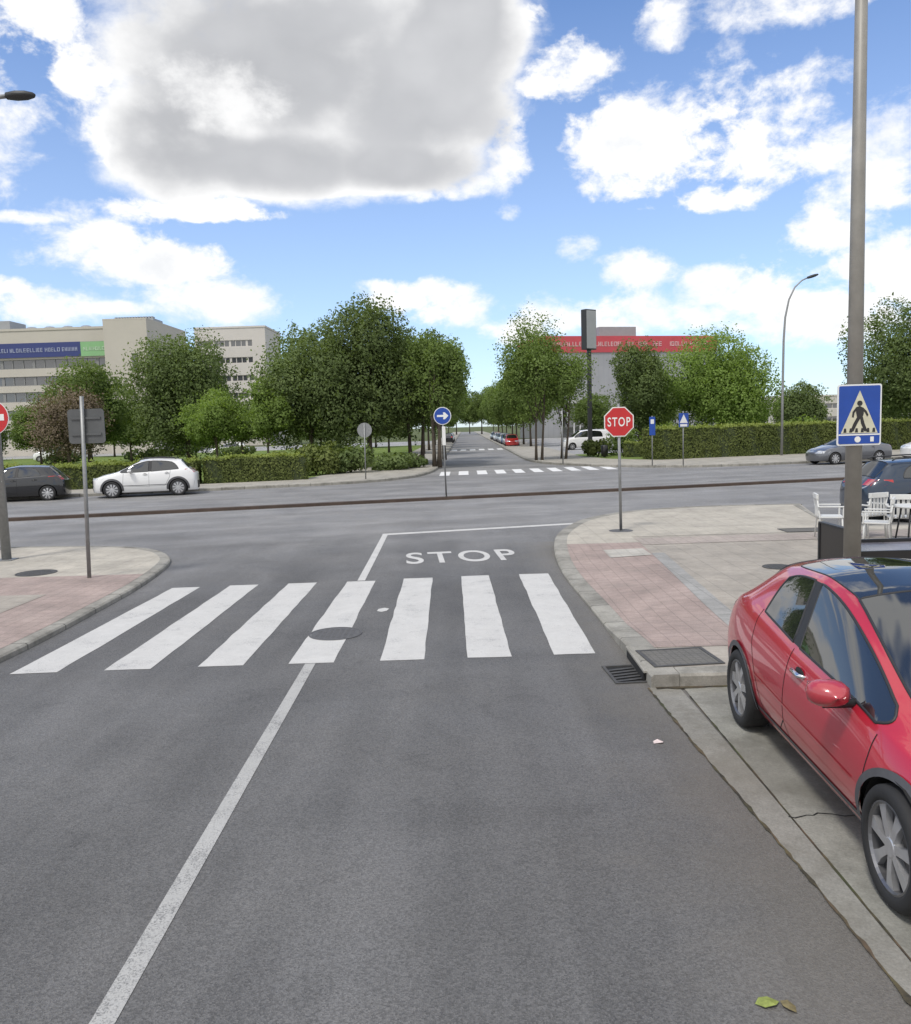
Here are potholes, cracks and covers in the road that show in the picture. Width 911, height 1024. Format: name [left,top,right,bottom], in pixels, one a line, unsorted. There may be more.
manhole cover [309,627,362,640]
manhole cover [635,647,725,668]
drain grate [602,664,647,684]
